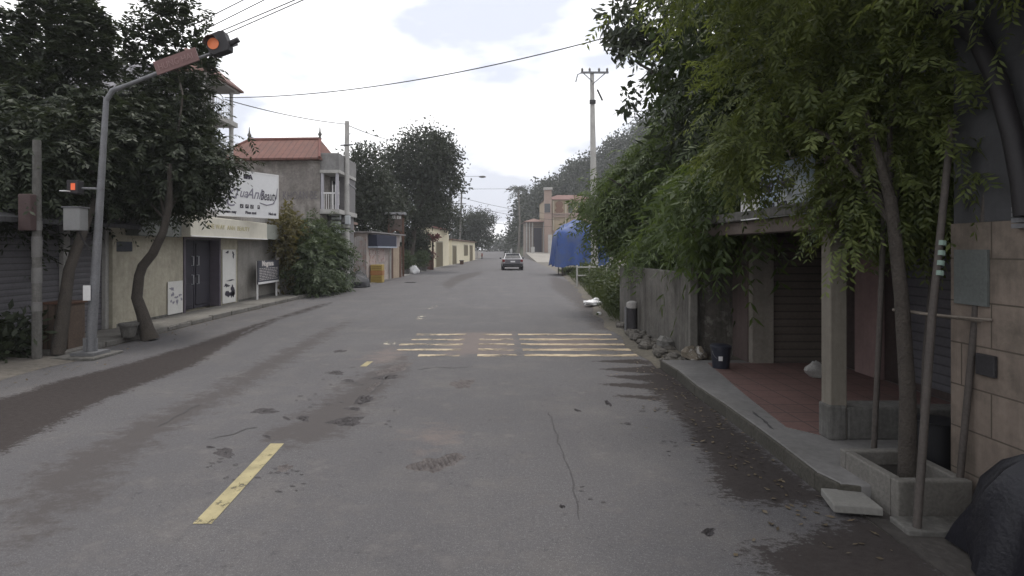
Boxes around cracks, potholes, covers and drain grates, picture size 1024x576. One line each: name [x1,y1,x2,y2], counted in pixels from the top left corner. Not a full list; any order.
pothole [354,395,373,405]
crack [548,412,579,518]
pothole [213,447,234,458]
pothole [405,453,466,473]
pothole [325,416,364,426]
